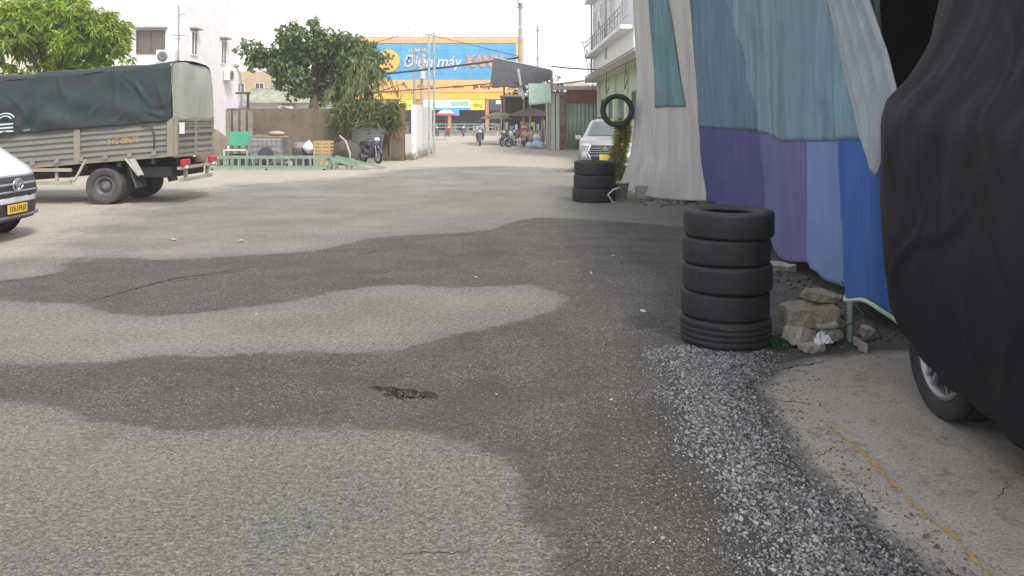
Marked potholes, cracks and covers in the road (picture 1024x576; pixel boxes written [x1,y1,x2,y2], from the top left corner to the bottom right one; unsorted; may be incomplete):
crack [772,361,823,373]
pothole [367,385,438,400]
crack [80,266,258,304]
